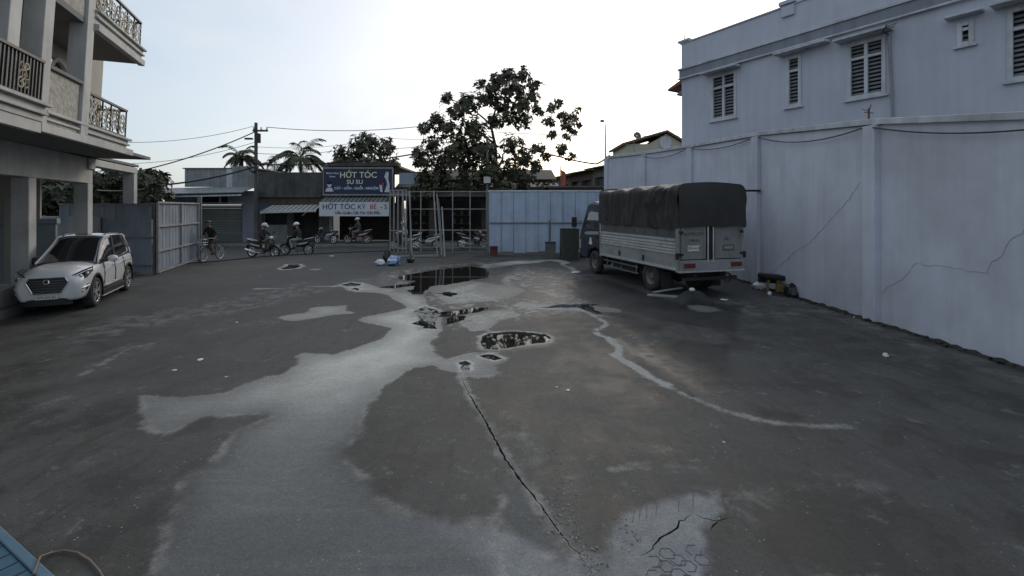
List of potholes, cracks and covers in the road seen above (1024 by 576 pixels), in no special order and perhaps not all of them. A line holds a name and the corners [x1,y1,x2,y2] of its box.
pothole [412,306,439,329]
crack [461,377,593,572]
pothole [480,331,551,350]
crack [633,493,736,576]
